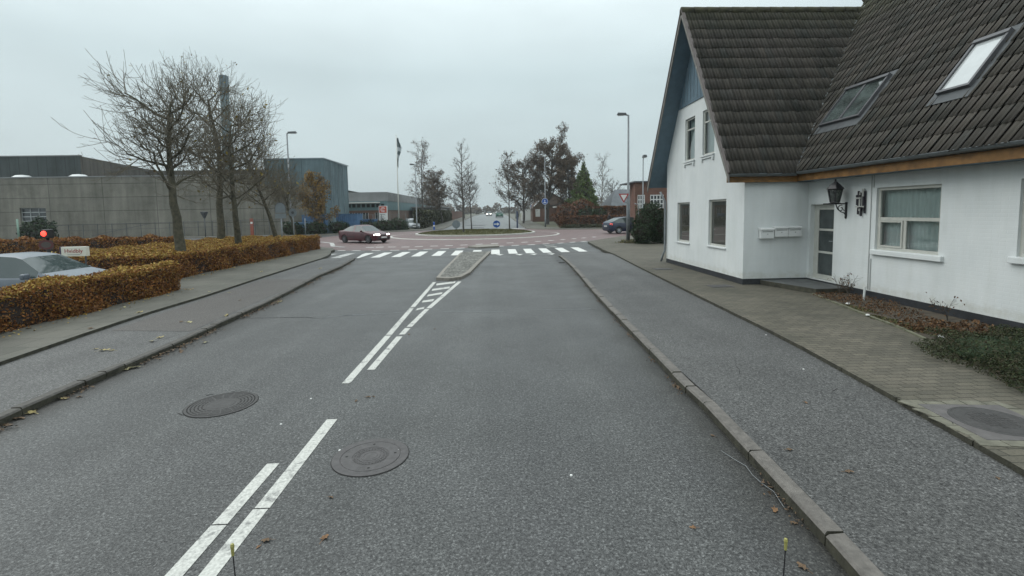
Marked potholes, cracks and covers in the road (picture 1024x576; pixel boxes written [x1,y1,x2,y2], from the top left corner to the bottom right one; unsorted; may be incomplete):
manhole cover [182,392,259,418]
manhole cover [898,400,1024,447]
manhole cover [331,438,409,477]
